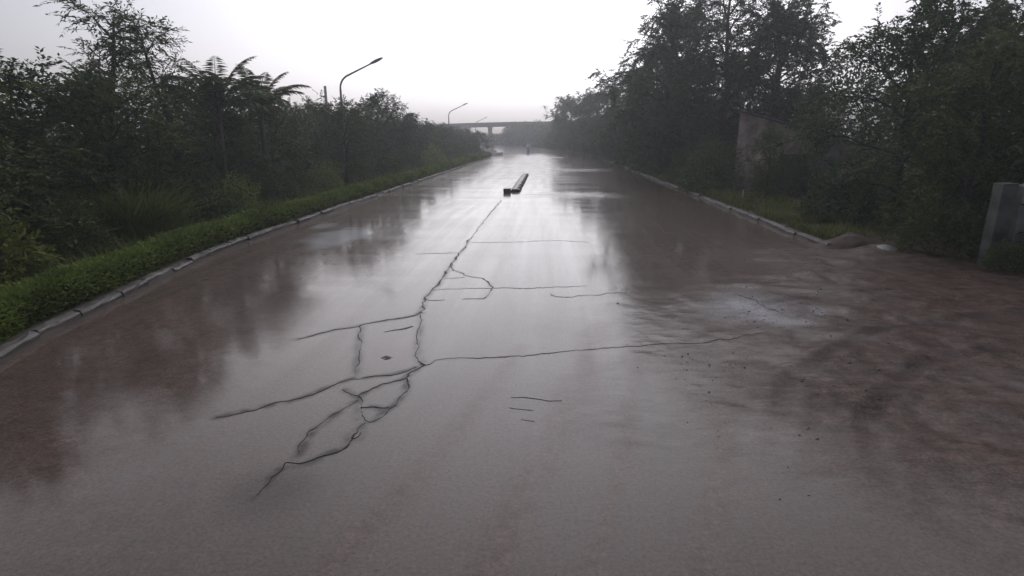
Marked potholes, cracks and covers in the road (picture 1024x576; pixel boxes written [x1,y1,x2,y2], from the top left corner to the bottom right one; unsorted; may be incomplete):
crack [225,200,757,495]
